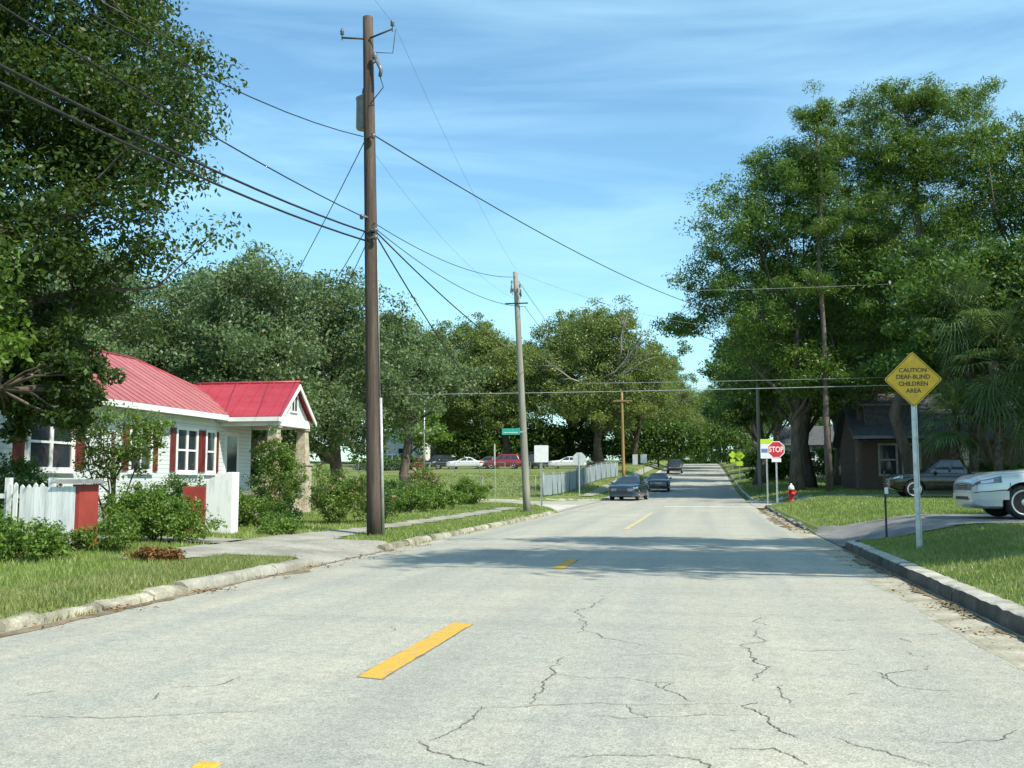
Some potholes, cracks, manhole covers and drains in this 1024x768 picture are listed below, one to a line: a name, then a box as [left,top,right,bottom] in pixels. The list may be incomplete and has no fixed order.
crack [876,633,958,691]
crack [419,658,807,765]
crack [563,754,712,768]
crack [25,694,283,718]
